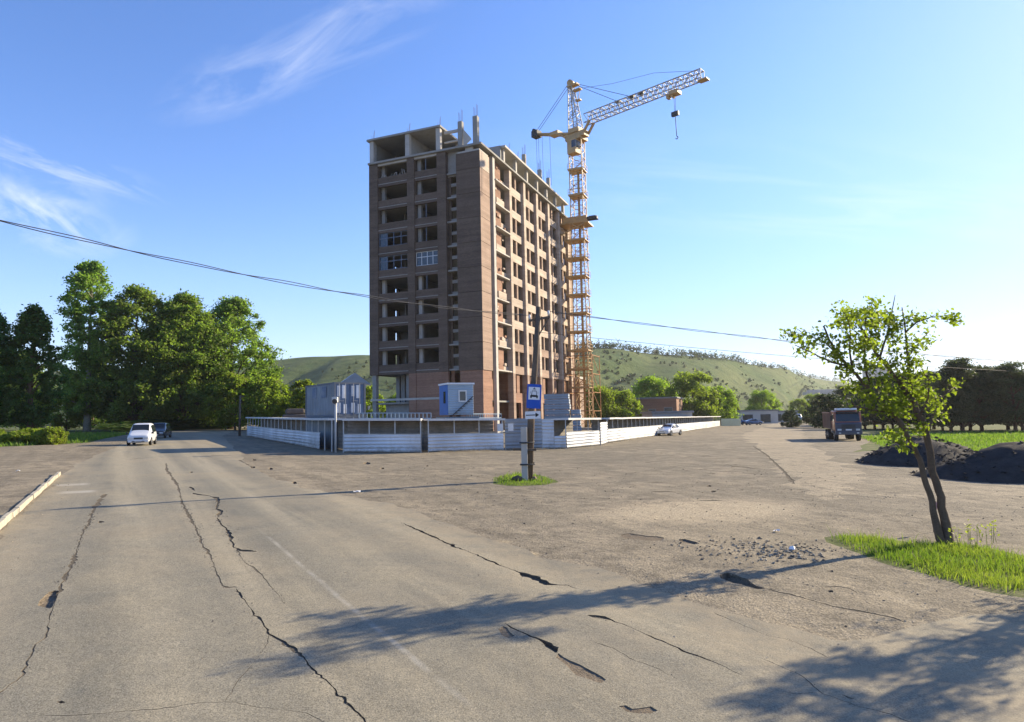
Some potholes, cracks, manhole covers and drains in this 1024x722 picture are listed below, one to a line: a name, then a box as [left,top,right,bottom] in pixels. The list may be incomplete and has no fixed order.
pothole [38,591,59,608]
crack [404,523,574,588]
crack [44,464,368,722]
crack [580,615,741,678]
pothole [720,572,765,589]
pothole [619,705,658,714]
crack [768,586,903,622]
crack [0,494,107,694]
crack [506,624,559,653]
